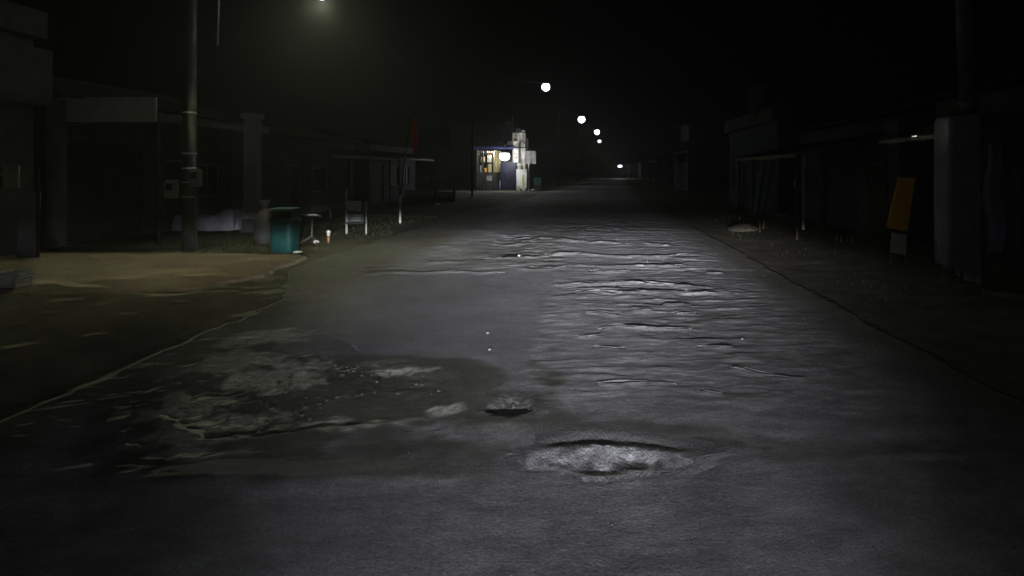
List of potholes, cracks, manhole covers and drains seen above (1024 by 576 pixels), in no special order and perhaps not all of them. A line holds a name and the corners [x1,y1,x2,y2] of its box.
crack [351,237,743,348]
pothole [465,389,553,422]
crack [702,365,805,393]
pothole [489,421,750,493]
